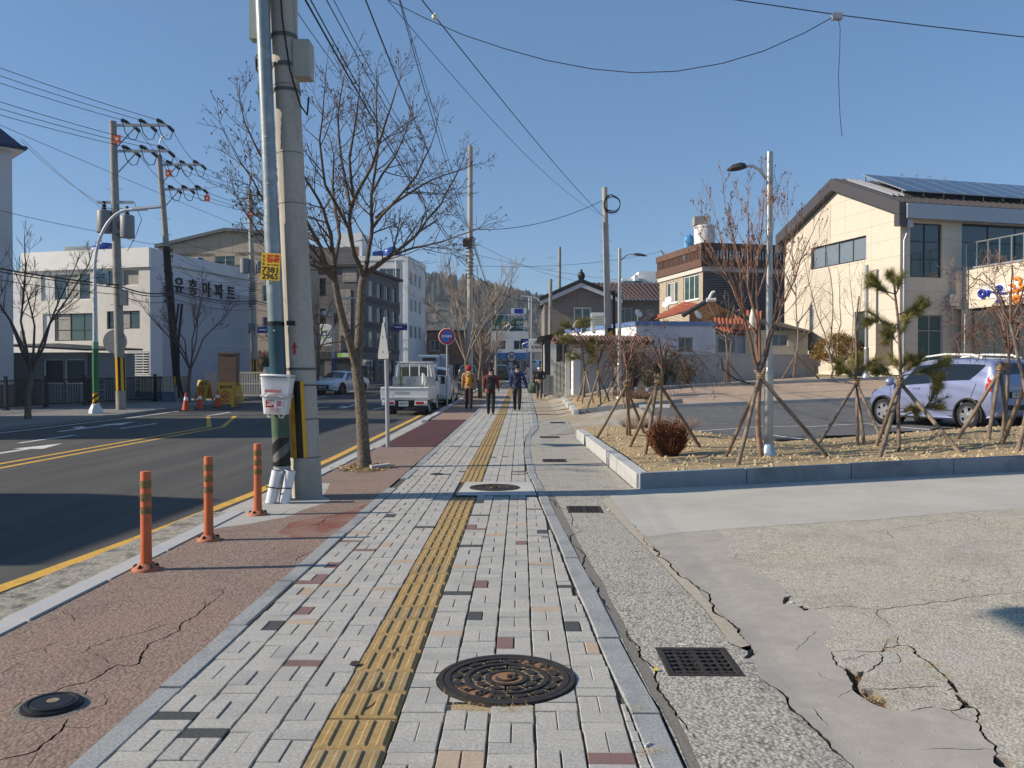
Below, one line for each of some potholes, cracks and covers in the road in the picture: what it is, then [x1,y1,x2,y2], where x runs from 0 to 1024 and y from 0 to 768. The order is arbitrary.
manhole cover [457,482,536,495]
crack [1,587,226,766]
crack [796,591,1024,761]
crack [633,524,751,650]
manhole cover [438,654,575,708]
pothole [845,667,891,709]
utility cover [10,692,92,721]
drain grate [566,506,604,539]
